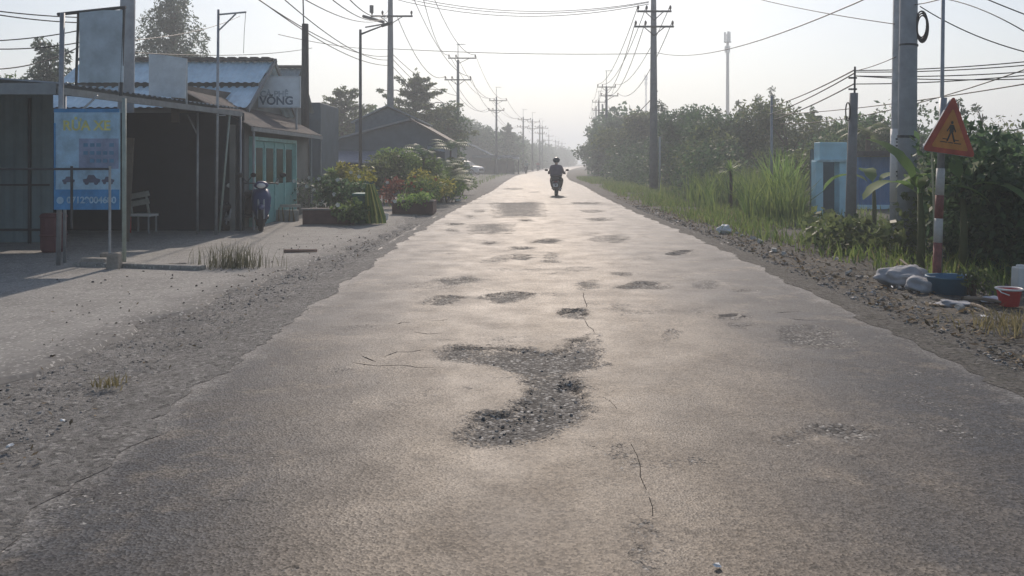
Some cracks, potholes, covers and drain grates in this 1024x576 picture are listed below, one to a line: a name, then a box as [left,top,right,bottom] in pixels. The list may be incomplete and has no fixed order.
pothole [434,276,482,284]
pothole [479,291,536,304]
pothole [421,295,464,305]
pothole [556,308,589,319]
pothole [615,281,670,289]
pothole [437,334,604,447]
crack [358,319,447,368]
